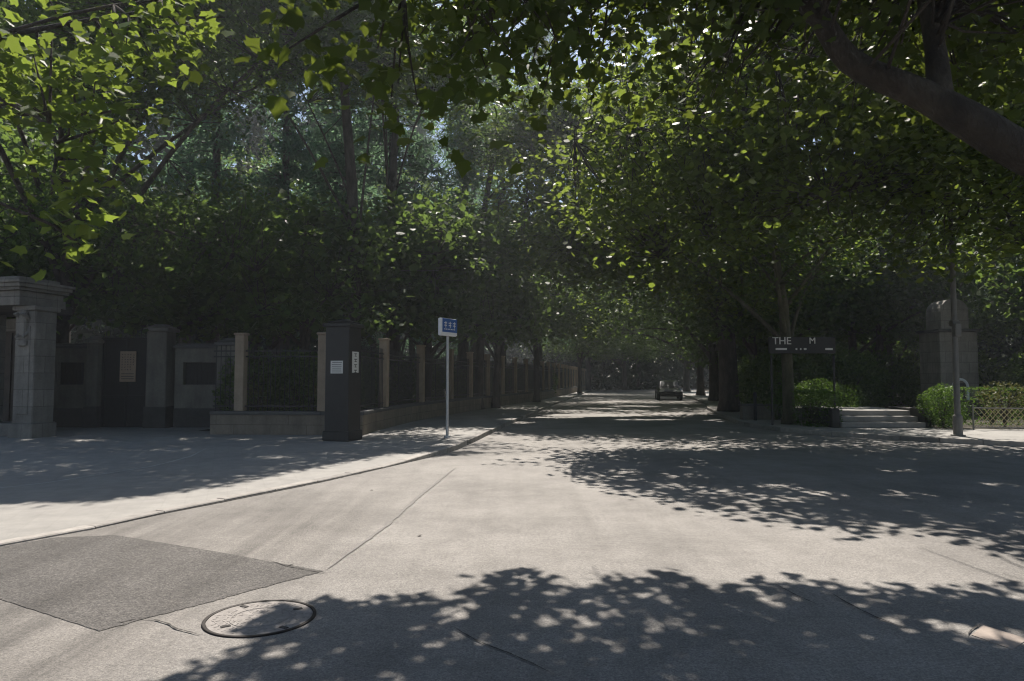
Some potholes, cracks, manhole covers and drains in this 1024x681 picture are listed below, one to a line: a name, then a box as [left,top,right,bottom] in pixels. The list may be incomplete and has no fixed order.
crack [119,618,200,635]
manhole cover [201,600,316,638]
